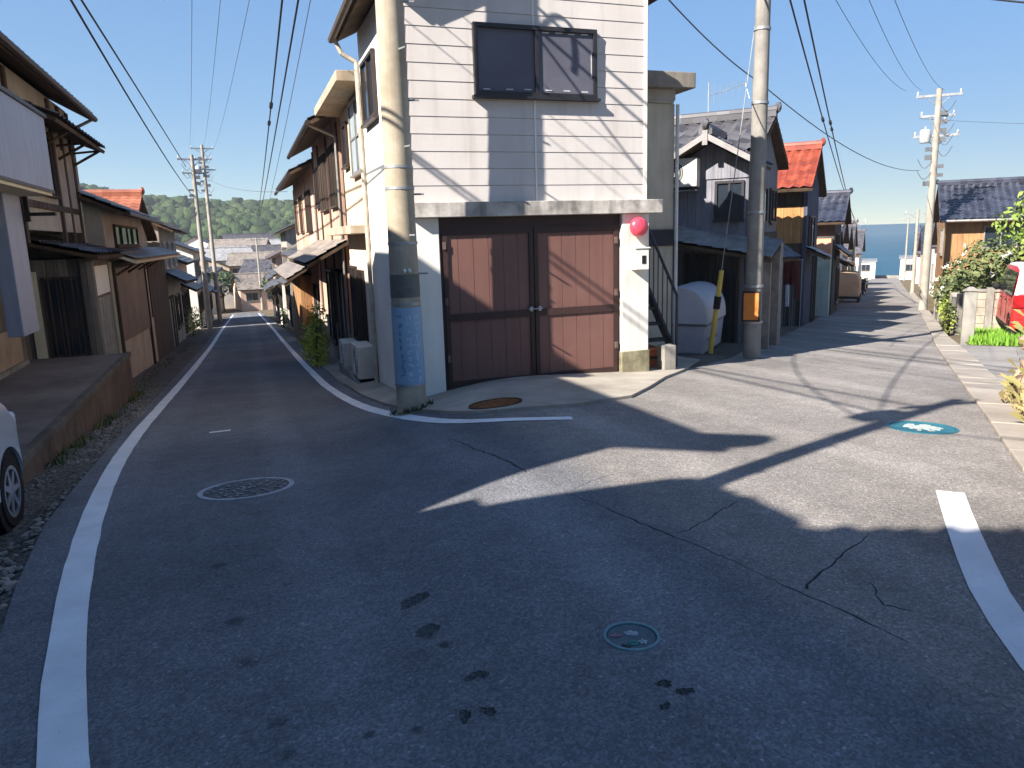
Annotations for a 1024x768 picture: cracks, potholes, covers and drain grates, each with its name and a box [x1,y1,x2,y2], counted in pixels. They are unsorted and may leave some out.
manhole cover [603,621,661,651]
manhole cover [468,397,522,411]
manhole cover [197,477,294,501]
manhole cover [886,421,959,435]
crack [448,438,912,643]
